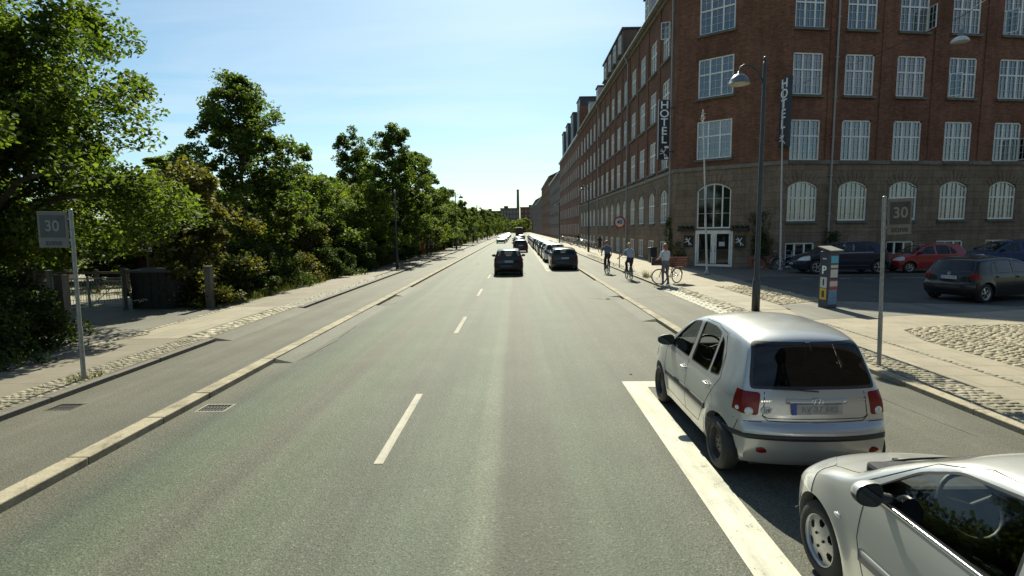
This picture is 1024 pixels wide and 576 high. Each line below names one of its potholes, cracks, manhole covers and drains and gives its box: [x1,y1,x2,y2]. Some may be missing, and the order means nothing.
drain grate [194,404,236,412]
drain grate [43,403,87,411]
